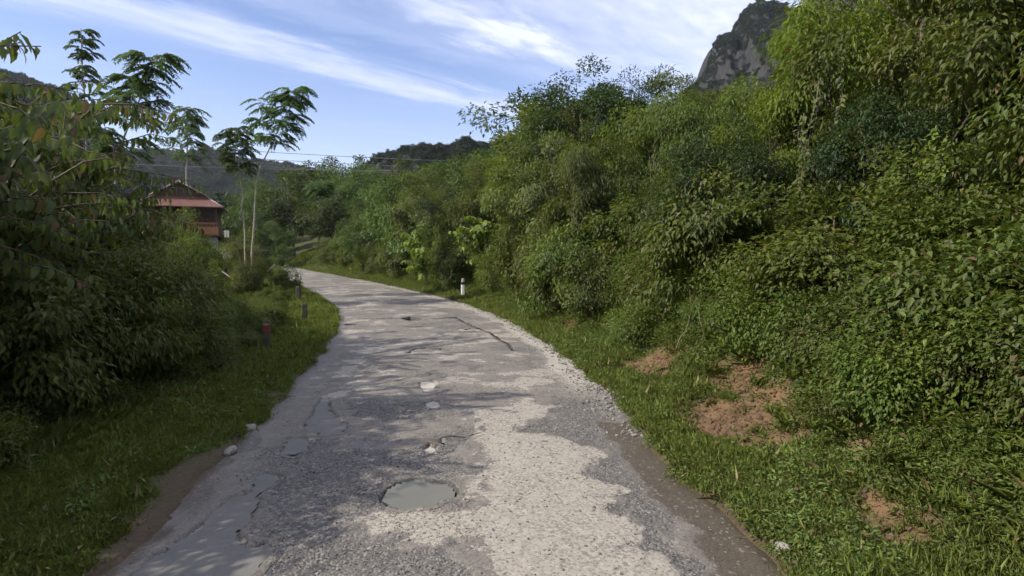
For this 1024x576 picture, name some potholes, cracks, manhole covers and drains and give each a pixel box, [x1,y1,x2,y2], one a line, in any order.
pothole [274,433,318,459]
pothole [297,395,355,437]
pothole [415,379,441,393]
pothole [416,441,444,457]
pothole [372,475,466,513]
pothole [117,470,288,576]
pothole [418,397,447,410]
crack [350,317,516,353]
crack [435,431,484,444]
